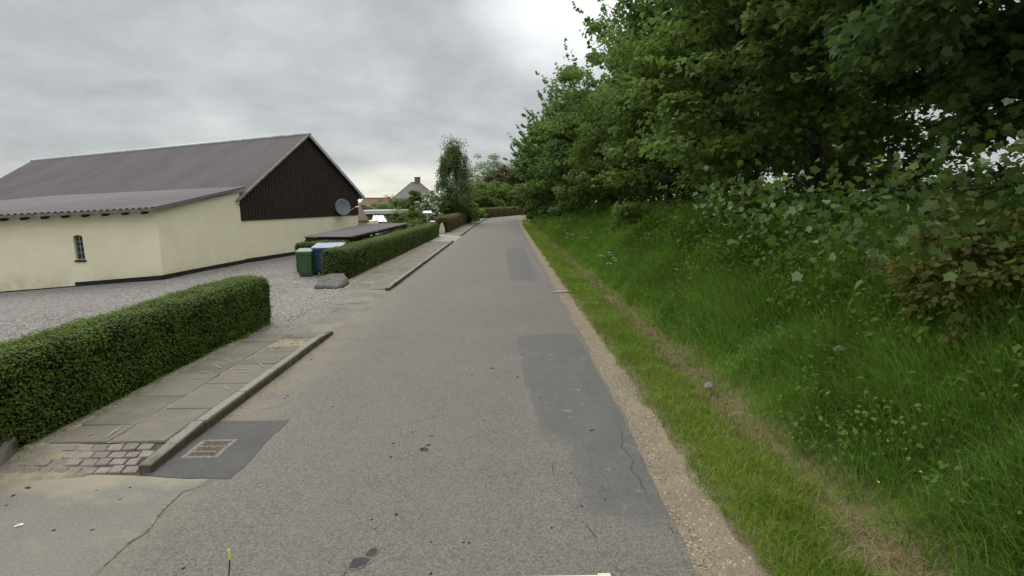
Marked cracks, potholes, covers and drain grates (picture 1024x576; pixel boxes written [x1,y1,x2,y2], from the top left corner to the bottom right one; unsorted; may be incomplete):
crack [618,425,649,501]
